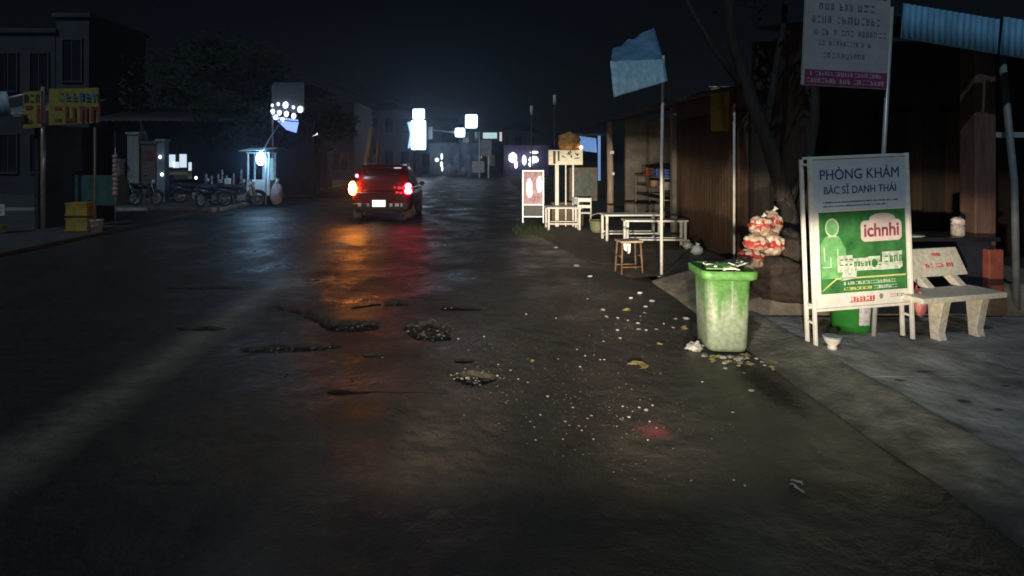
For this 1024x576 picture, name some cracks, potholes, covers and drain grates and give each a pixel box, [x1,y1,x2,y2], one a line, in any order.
pothole [453,370,497,386]
pothole [240,344,344,353]
pothole [272,306,380,332]
pothole [403,321,455,342]
